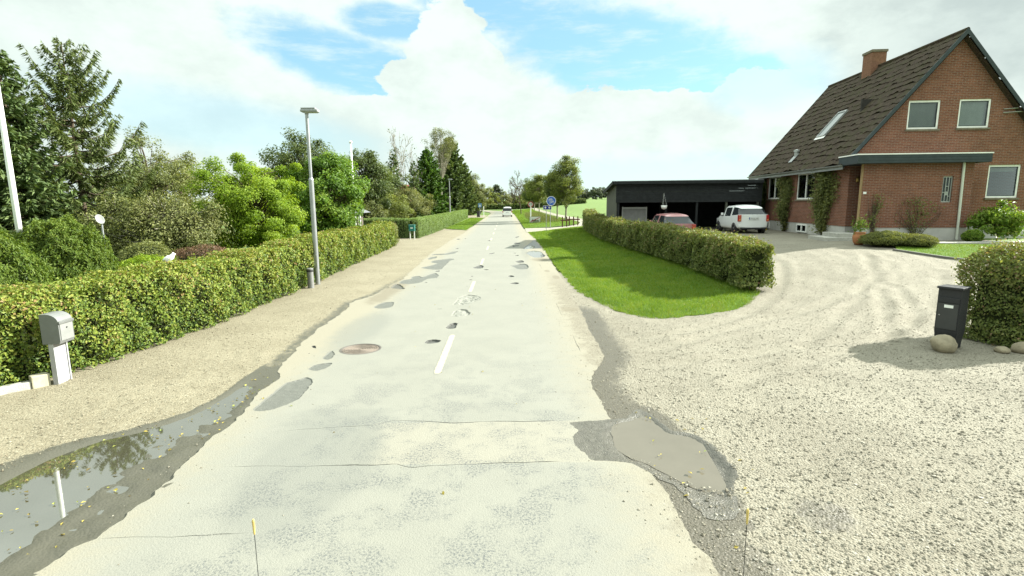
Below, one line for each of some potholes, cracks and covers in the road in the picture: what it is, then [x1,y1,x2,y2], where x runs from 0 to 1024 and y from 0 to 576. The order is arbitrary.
pothole [253,377,313,411]
pothole [570,409,739,520]
manhole cover [339,343,382,355]
pothole [309,363,332,371]
